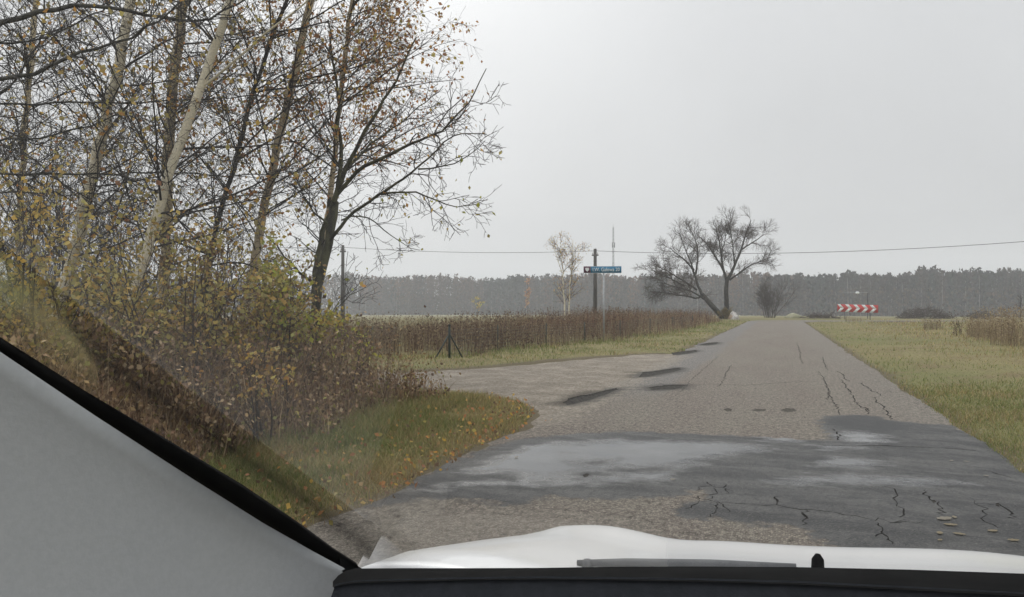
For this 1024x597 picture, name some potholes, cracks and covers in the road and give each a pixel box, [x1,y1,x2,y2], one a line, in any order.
crack [718,344,975,451]
crack [690,482,947,544]
pothole [563,388,618,405]
pothole [639,368,681,377]
crack [973,499,1016,528]
